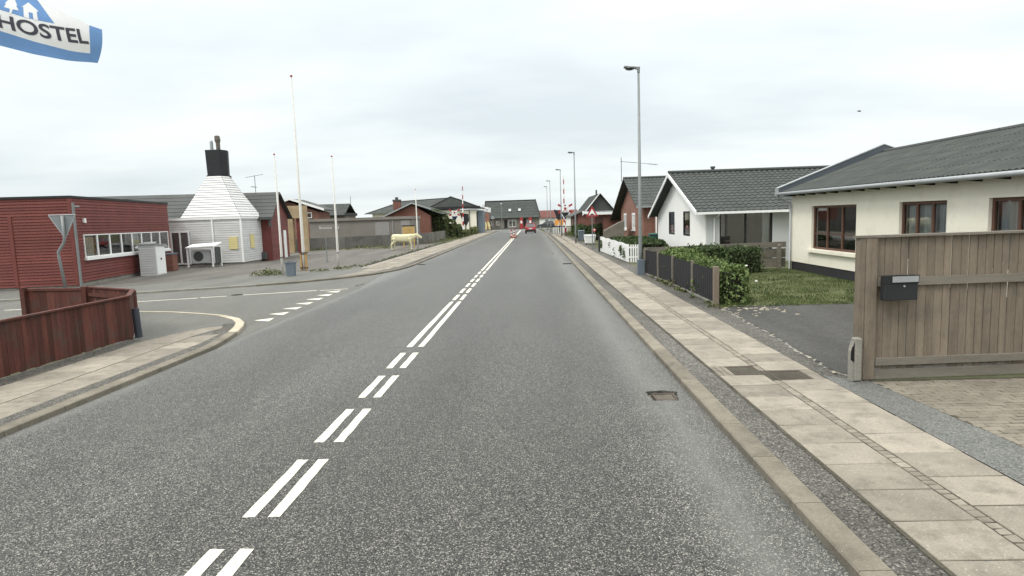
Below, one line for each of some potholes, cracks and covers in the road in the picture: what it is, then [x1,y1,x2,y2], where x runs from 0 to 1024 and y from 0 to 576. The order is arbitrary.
manhole cover [726,366,767,375]
manhole cover [766,371,812,381]
